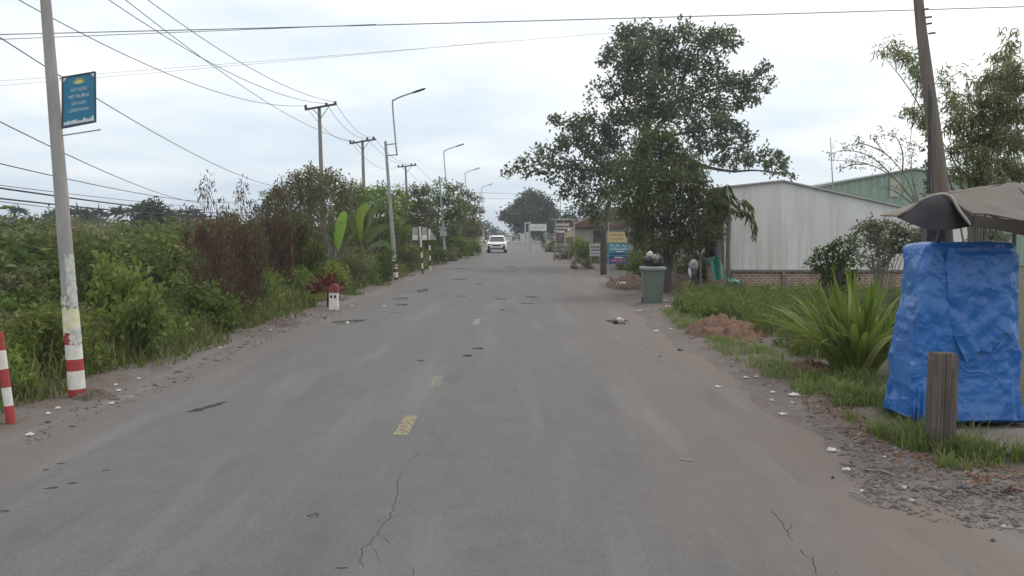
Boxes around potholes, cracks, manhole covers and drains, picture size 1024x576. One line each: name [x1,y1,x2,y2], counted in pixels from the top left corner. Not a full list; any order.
crack [770,508,838,576]
crack [359,453,420,570]
